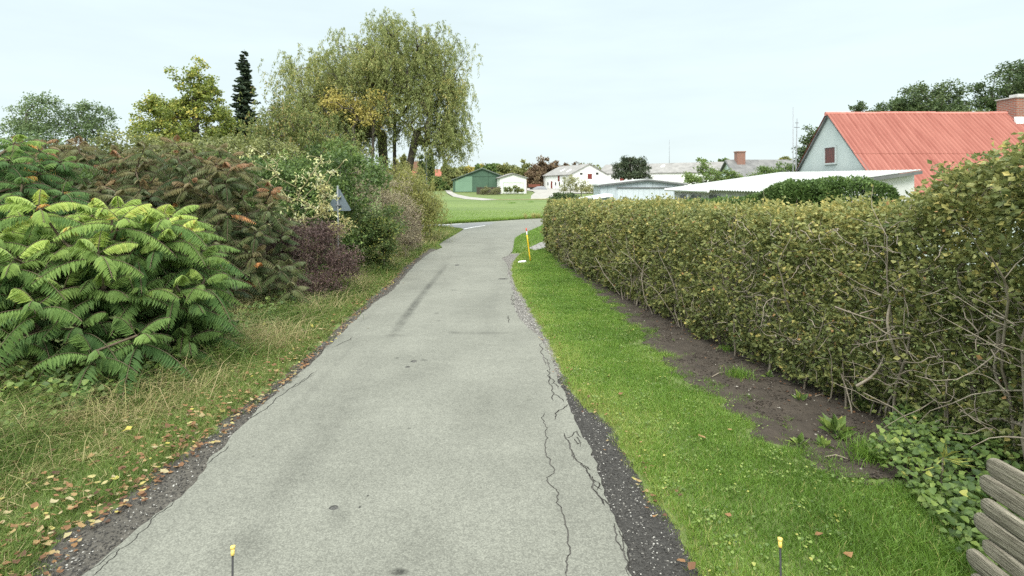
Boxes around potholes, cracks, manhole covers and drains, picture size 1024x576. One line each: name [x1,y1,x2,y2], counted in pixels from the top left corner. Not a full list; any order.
crack [251,372,314,418]
crack [90,503,173,576]
crack [613,523,629,575]
crack [539,343,609,576]
